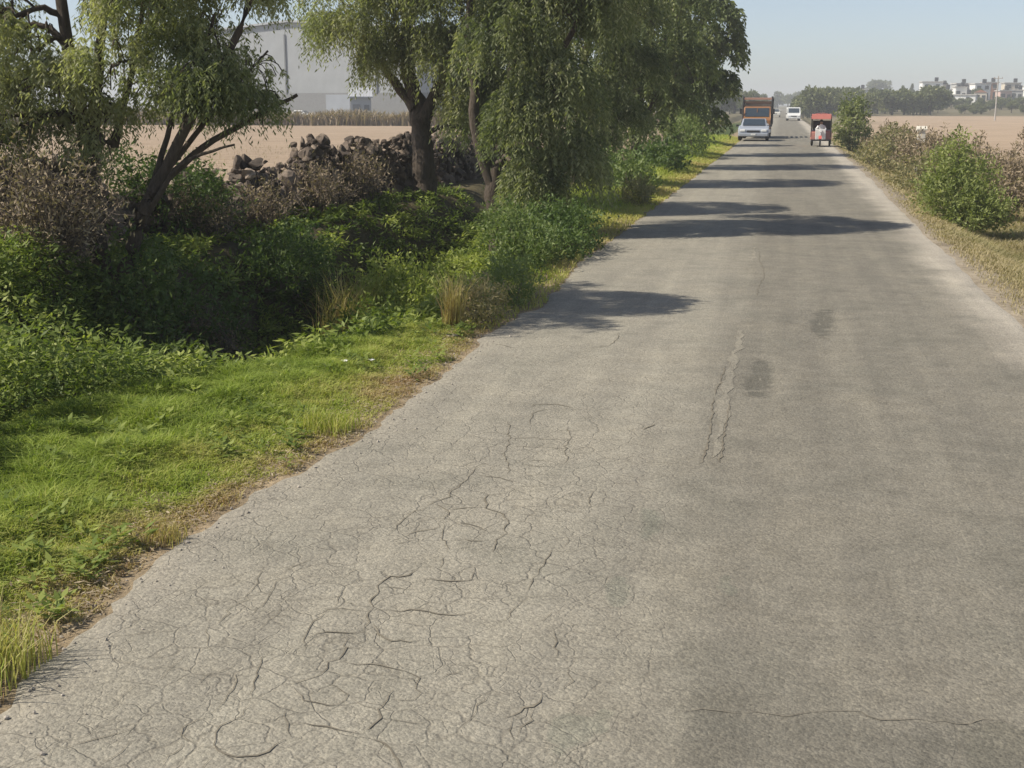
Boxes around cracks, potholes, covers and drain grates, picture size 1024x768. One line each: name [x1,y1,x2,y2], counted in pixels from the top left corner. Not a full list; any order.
crack [161,404,571,768]
crack [698,367,730,464]
crack [47,685,137,762]
